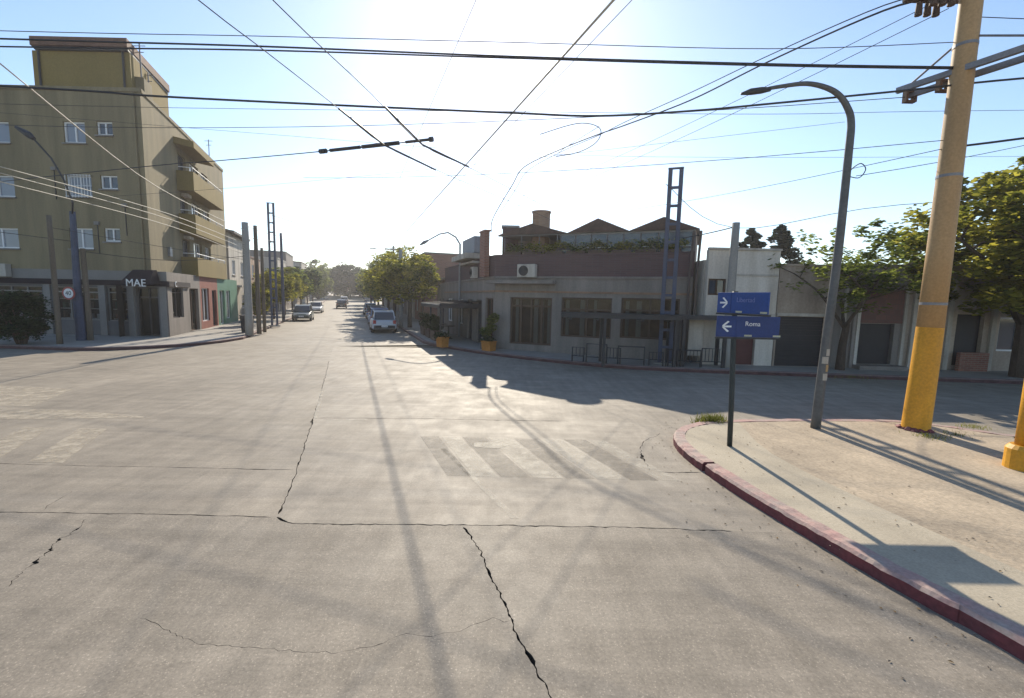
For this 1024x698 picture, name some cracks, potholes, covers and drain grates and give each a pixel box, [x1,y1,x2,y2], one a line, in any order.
crack [640,434,700,473]
crack [146,527,552,698]
crack [9,520,84,586]
